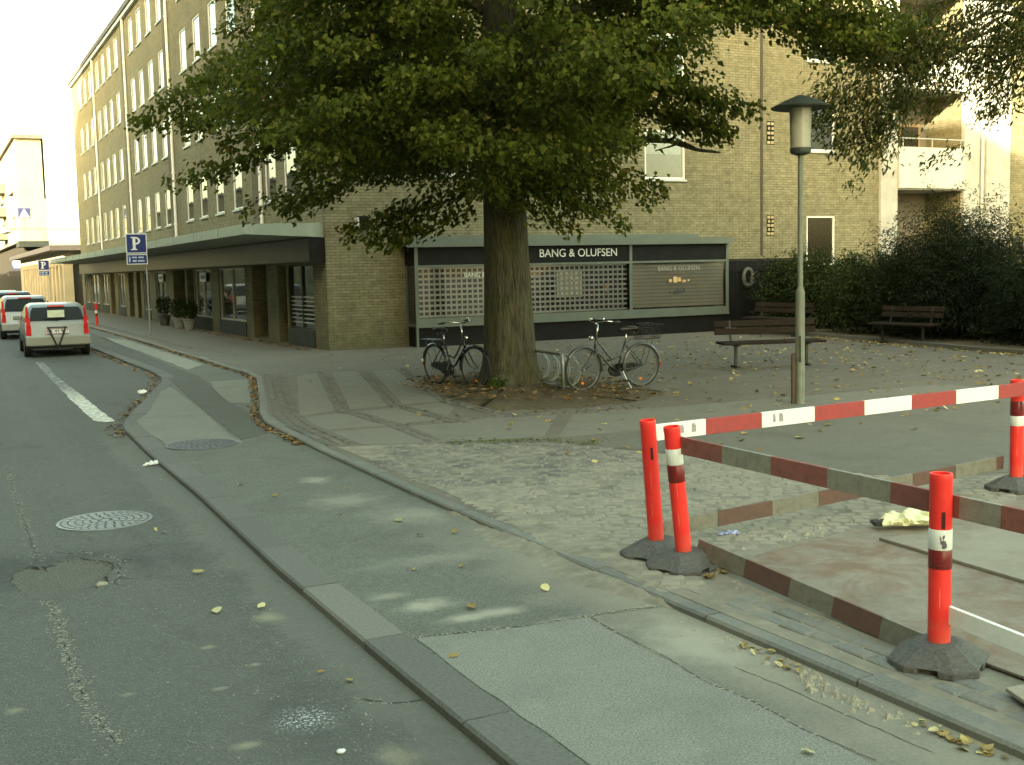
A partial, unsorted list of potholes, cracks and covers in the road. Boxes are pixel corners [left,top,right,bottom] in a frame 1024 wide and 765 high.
manhole cover [56,511,153,531]
pothole [9,557,115,600]
manhole cover [165,439,238,450]
